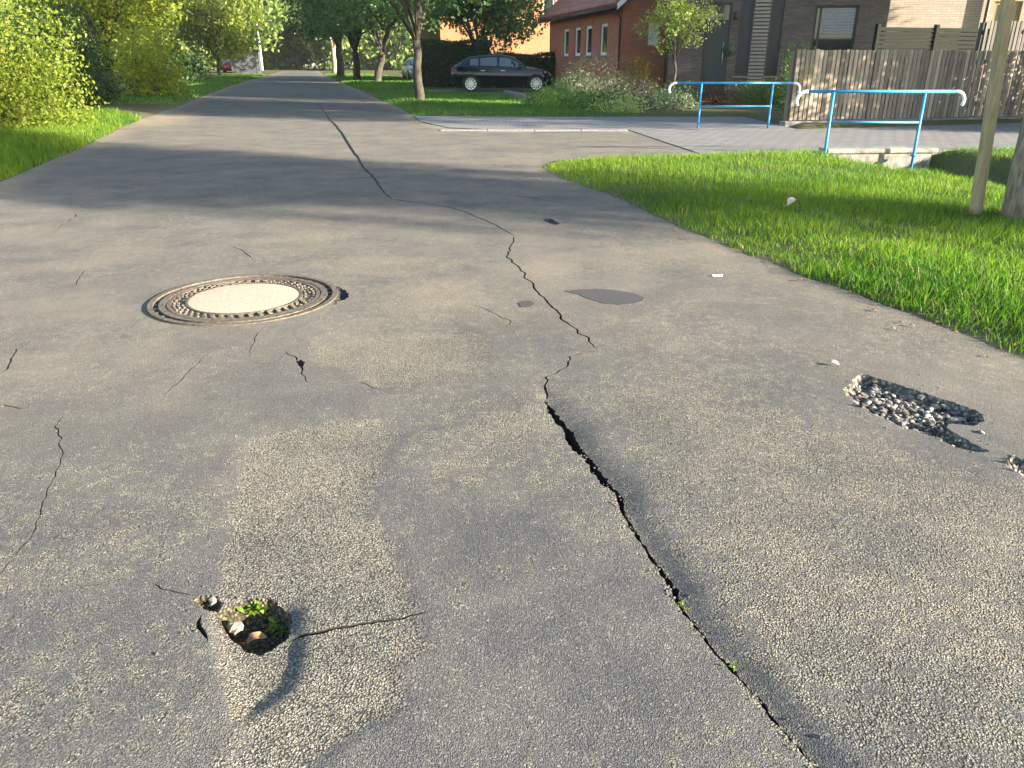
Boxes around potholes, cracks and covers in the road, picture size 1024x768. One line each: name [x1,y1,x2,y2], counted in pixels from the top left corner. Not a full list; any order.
manhole cover [147,274,338,326]
crack [395,199,819,768]
crack [284,350,378,389]
pothole [215,598,293,656]
crack [293,611,430,641]
crack [0,404,132,586]
pothole [193,595,224,612]
pothole [1000,455,1024,478]
pothole [842,374,989,452]
